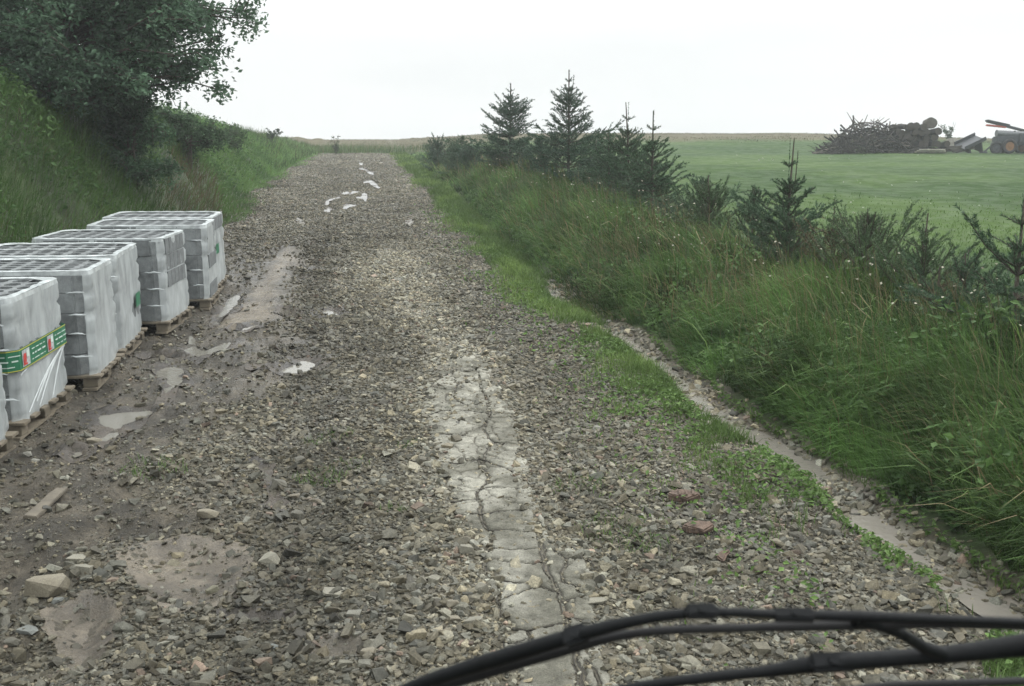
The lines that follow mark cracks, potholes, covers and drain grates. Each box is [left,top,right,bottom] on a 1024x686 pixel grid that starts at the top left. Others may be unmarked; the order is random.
crack [427,372,602,686]
pothole [79,402,172,449]
